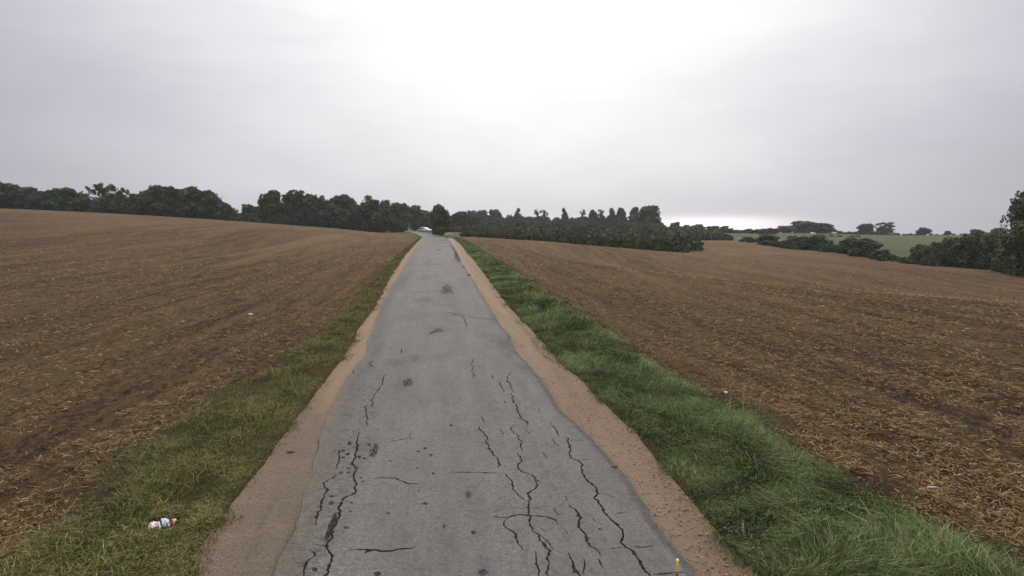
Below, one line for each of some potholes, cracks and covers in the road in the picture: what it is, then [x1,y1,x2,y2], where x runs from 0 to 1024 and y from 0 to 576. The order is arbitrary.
crack [303,361,415,576]
crack [456,359,684,576]
